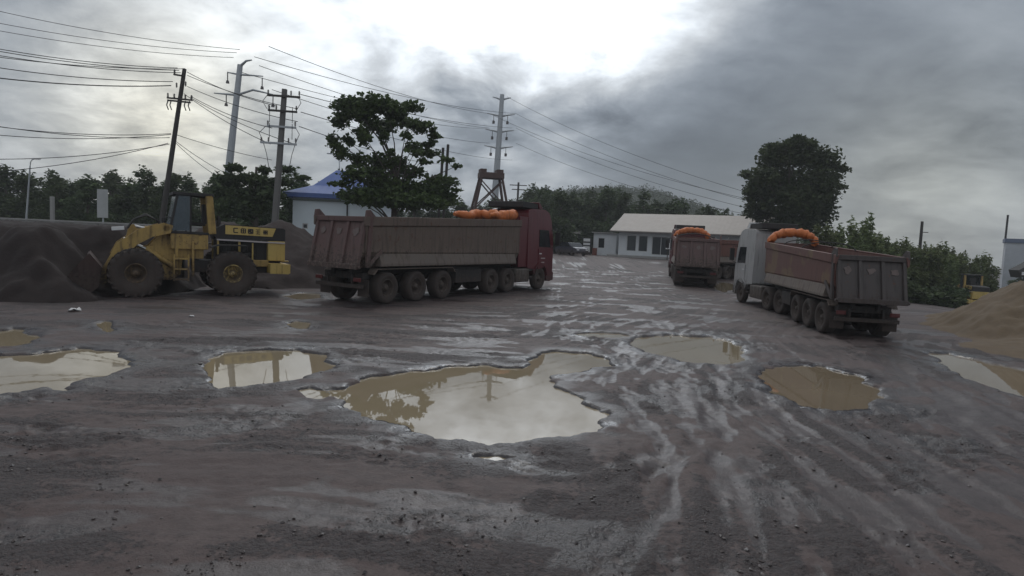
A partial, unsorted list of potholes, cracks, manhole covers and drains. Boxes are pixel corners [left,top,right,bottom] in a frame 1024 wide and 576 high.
pothole [0,323,65,350]
pothole [735,361,905,417]
pothole [0,343,157,402]
pothole [300,346,633,453]
pothole [616,332,762,369]
pothole [912,349,1024,399]
pothole [180,344,355,396]
